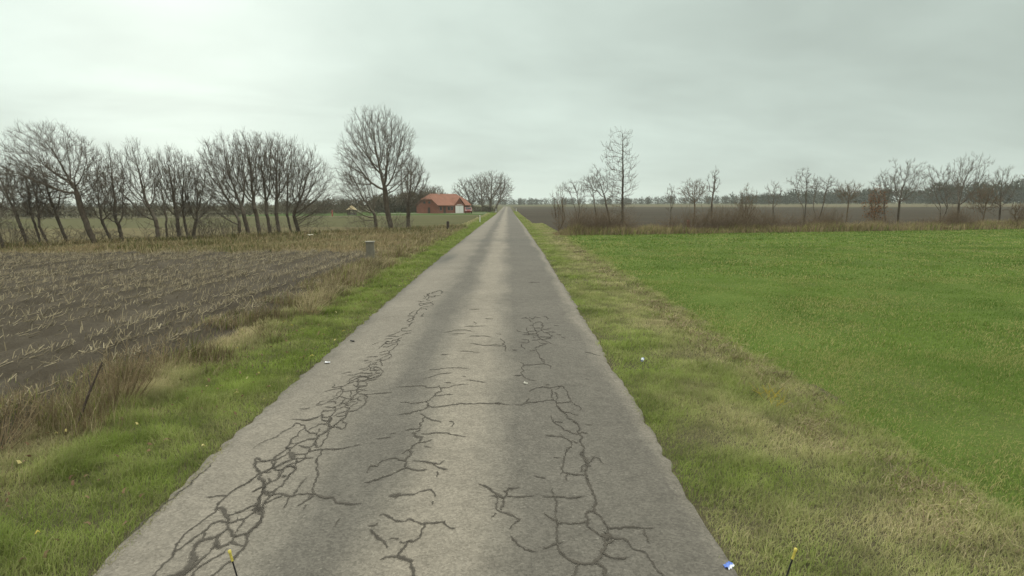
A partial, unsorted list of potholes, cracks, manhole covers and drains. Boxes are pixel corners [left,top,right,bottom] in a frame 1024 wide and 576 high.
crack [120,290,664,576]
